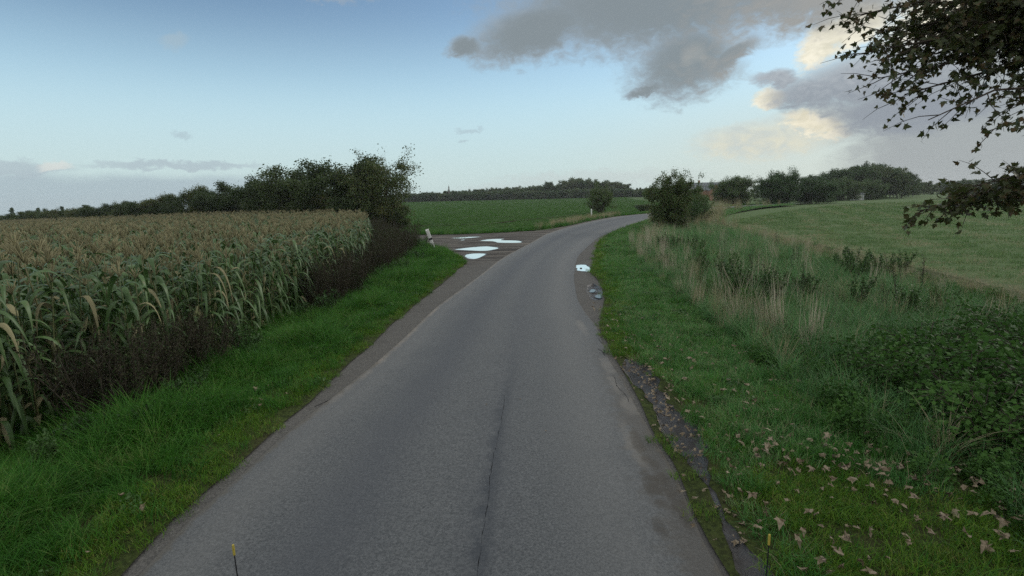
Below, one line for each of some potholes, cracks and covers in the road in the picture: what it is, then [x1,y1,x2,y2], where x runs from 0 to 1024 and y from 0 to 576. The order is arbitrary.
crack [477,399,505,573]
pothole [575,264,592,272]
pothole [586,283,603,300]
